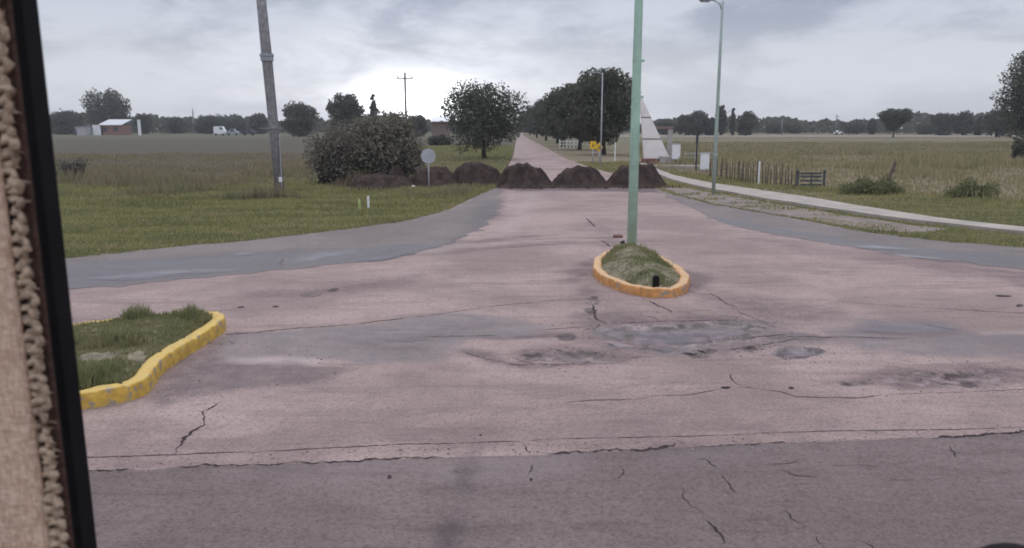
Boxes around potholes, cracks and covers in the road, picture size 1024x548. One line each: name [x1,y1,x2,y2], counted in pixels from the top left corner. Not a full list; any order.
crack [572,374,1016,402]
pothole [681,348,718,359]
pothole [870,369,1007,388]
crack [764,460,914,480]
crack [175,403,218,453]
crack [682,492,725,543]
pothole [734,344,770,354]
pothole [520,348,620,367]
pothole [589,318,764,355]
crack [544,292,826,350]
pothole [770,346,826,359]
